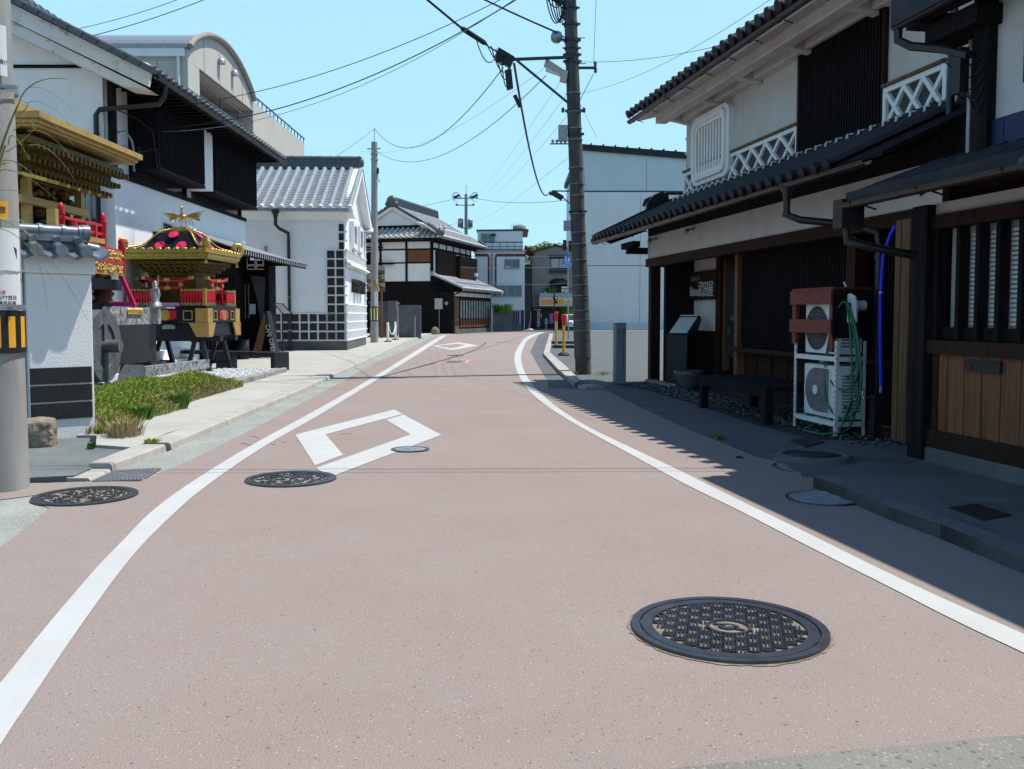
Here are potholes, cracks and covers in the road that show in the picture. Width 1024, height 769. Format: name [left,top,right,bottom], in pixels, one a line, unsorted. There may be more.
manhole cover [785,490,856,506]
manhole cover [30,486,139,507]
drain grate [92,468,161,482]
manhole cover [773,449,880,475]
manhole cover [627,596,835,666]
manhole cover [244,470,337,488]
